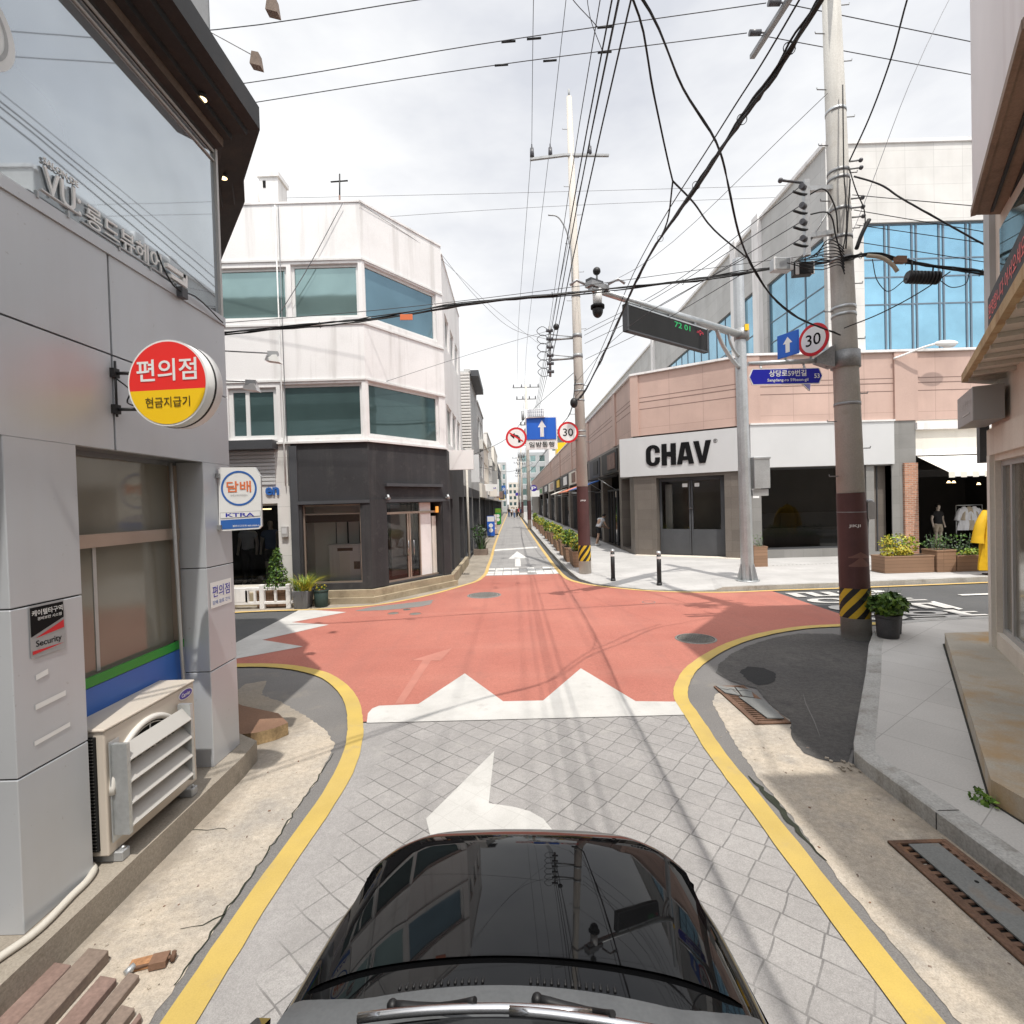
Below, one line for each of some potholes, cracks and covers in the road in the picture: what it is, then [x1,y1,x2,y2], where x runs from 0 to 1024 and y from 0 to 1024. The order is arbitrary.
drain grate [714,685,791,725]
drain grate [887,839,1024,966]
manhole cover [675,633,717,644]
crack [748,776,827,861]
